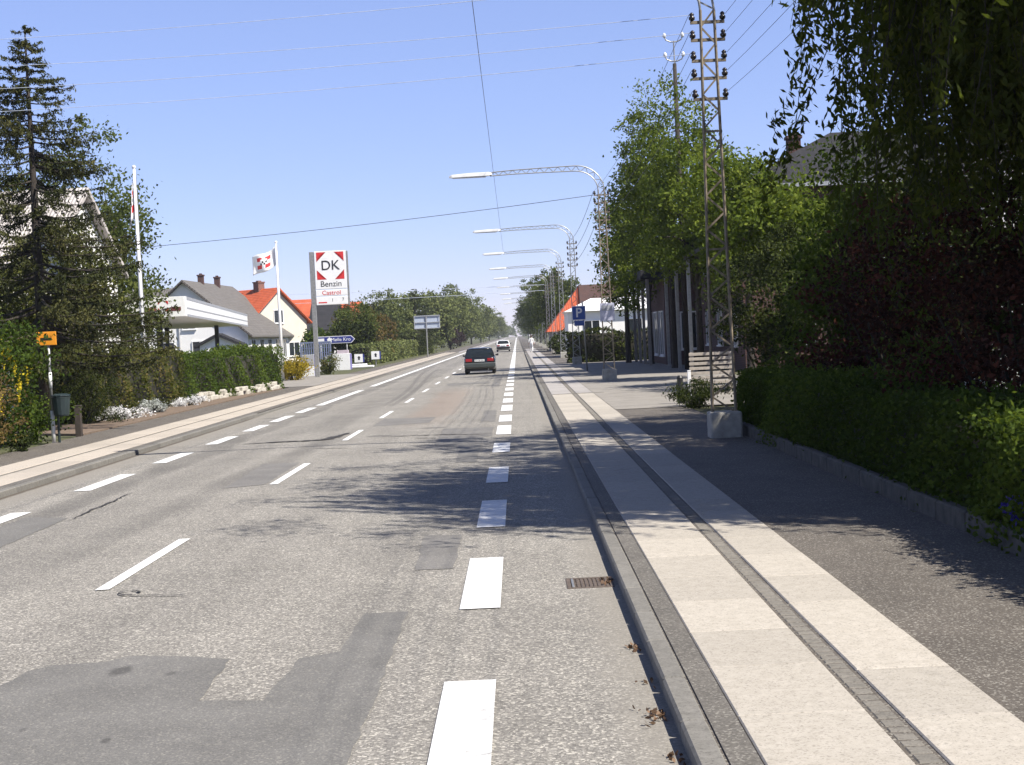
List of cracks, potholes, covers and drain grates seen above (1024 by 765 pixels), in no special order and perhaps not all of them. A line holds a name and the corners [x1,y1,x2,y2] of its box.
crack [69,492,132,520]
drain grate [566,576,615,589]
